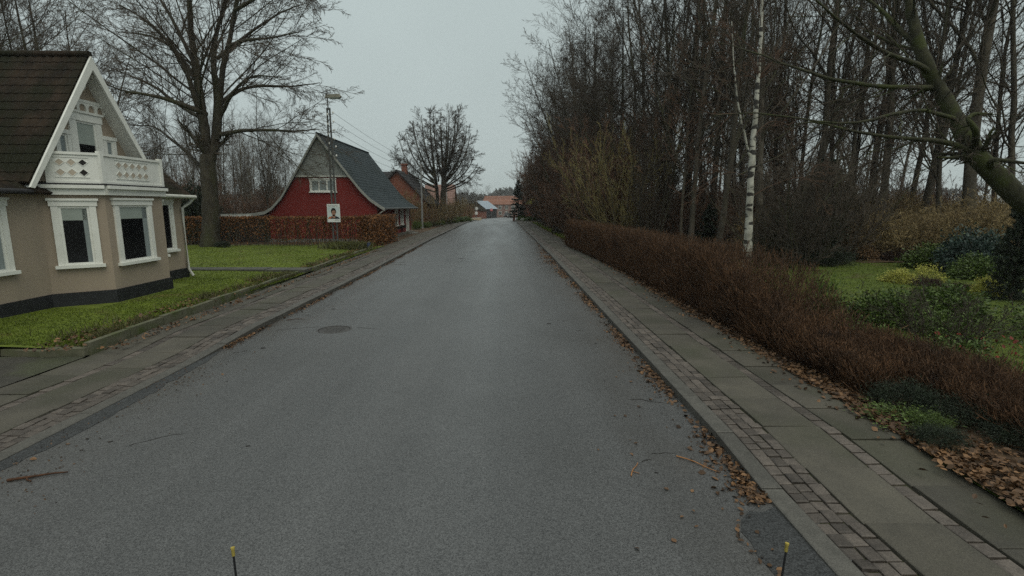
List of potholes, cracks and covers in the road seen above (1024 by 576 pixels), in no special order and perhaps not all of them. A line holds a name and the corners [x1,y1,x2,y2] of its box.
manhole cover [316,325,352,334]
